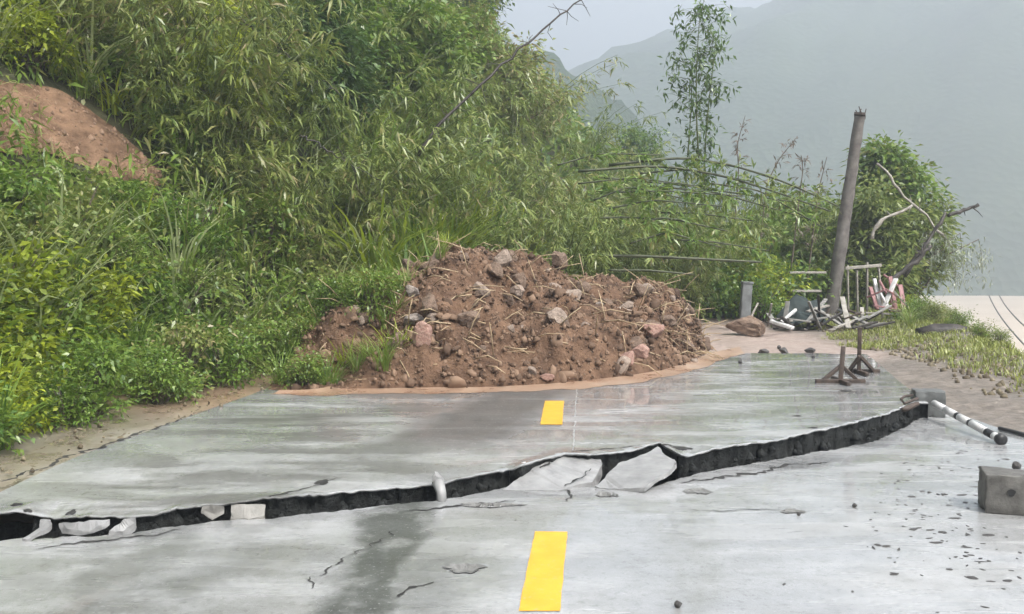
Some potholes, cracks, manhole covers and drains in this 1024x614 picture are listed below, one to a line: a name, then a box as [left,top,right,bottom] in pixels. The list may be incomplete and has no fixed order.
crack [397,582,433,596]
crack [33,404,929,588]
